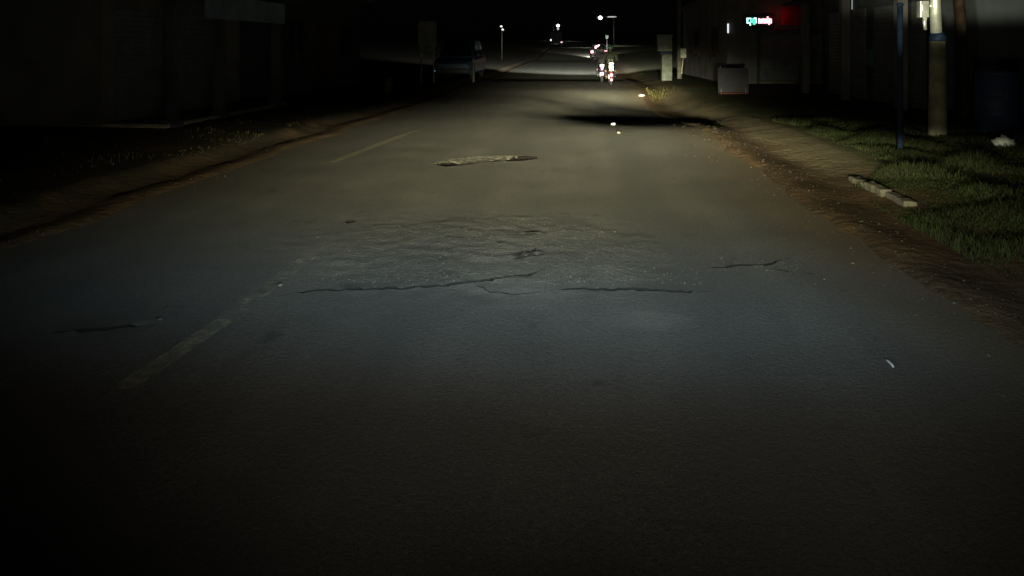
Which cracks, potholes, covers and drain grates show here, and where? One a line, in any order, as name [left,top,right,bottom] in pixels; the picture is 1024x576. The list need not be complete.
pothole [433,155,538,167]
crack [50,324,154,333]
crack [279,232,709,296]
crack [709,258,817,275]
